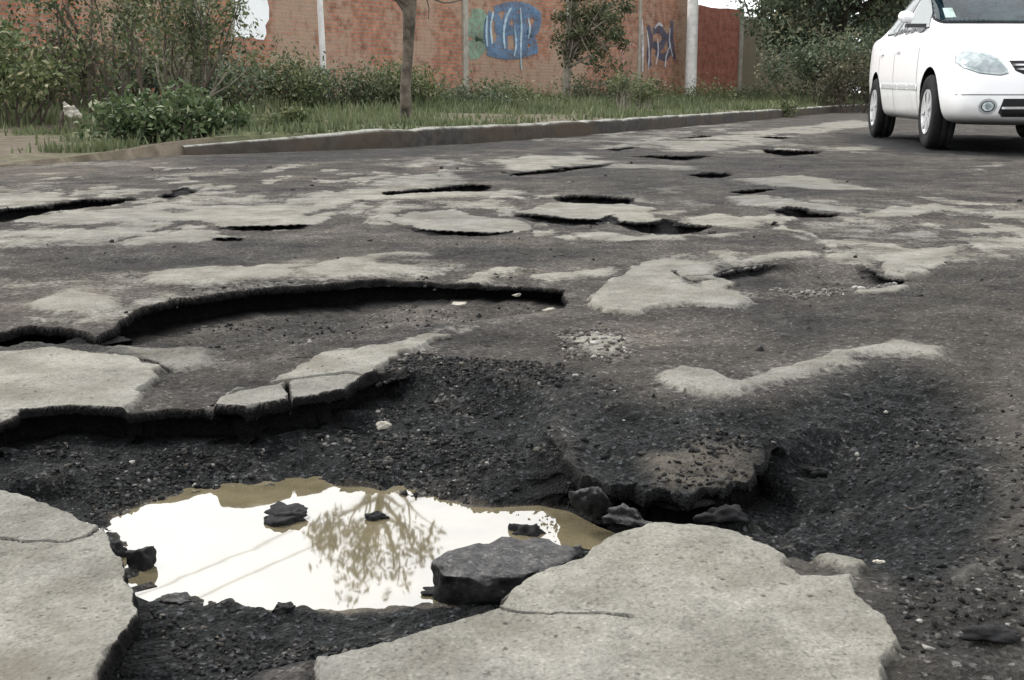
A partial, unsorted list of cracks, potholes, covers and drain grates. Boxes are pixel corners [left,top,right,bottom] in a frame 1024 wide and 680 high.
pothole [553,194,636,204]
crack [498,606,634,618]
pothole [713,263,911,293]
pothole [515,213,611,227]
pothole [0,278,570,350]
crack [0,525,102,543]
pothole [0,197,139,224]
pothole [380,184,493,196]
pothole [0,368,980,680]
pothole [158,187,200,200]
pothole [596,214,717,235]
pothole [771,206,841,218]
